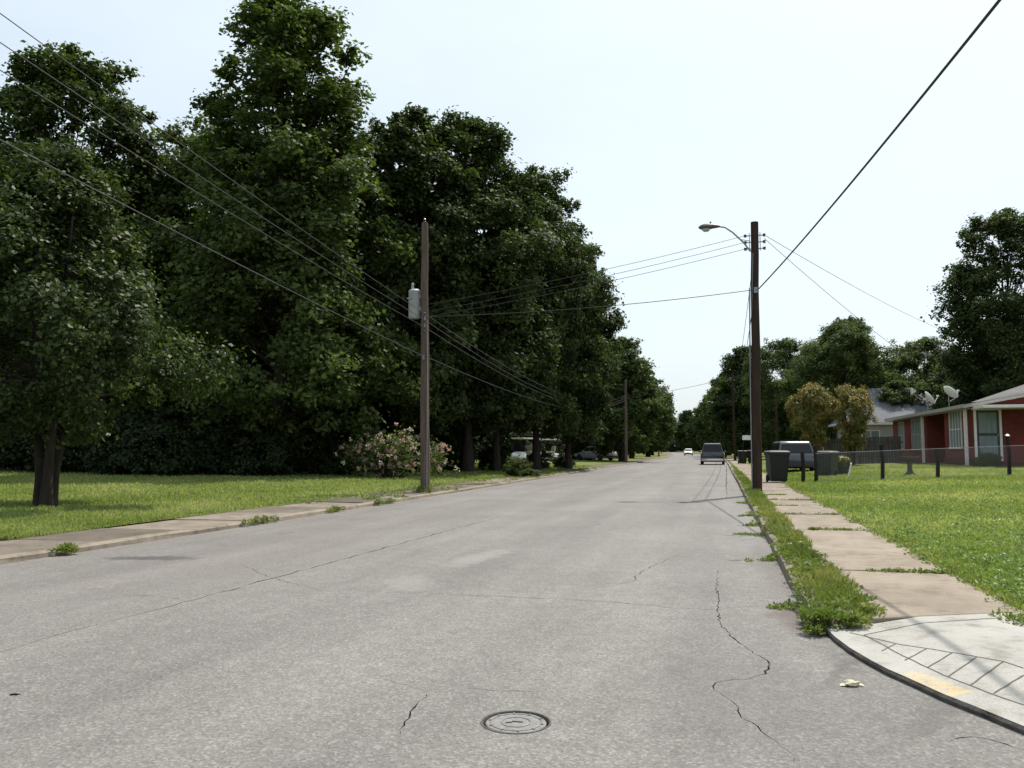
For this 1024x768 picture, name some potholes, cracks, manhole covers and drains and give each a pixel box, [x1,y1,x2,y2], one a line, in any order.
manhole cover [481,710,551,734]
crack [383,678,427,734]
crack [441,558,792,754]
